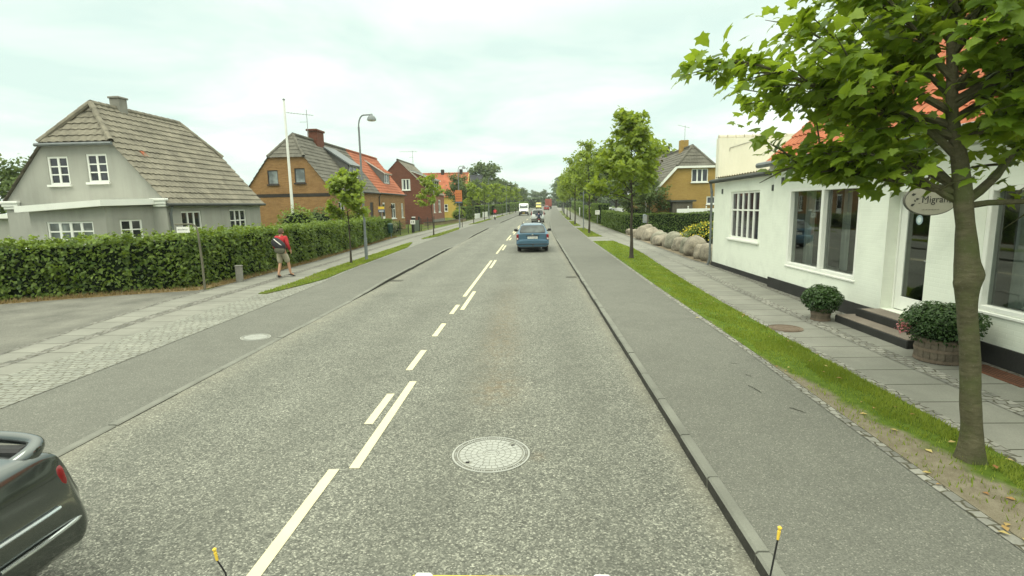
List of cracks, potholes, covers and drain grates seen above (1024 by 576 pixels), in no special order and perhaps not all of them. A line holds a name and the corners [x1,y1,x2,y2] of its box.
manhole cover [767,324,804,332]
manhole cover [452,437,530,473]
